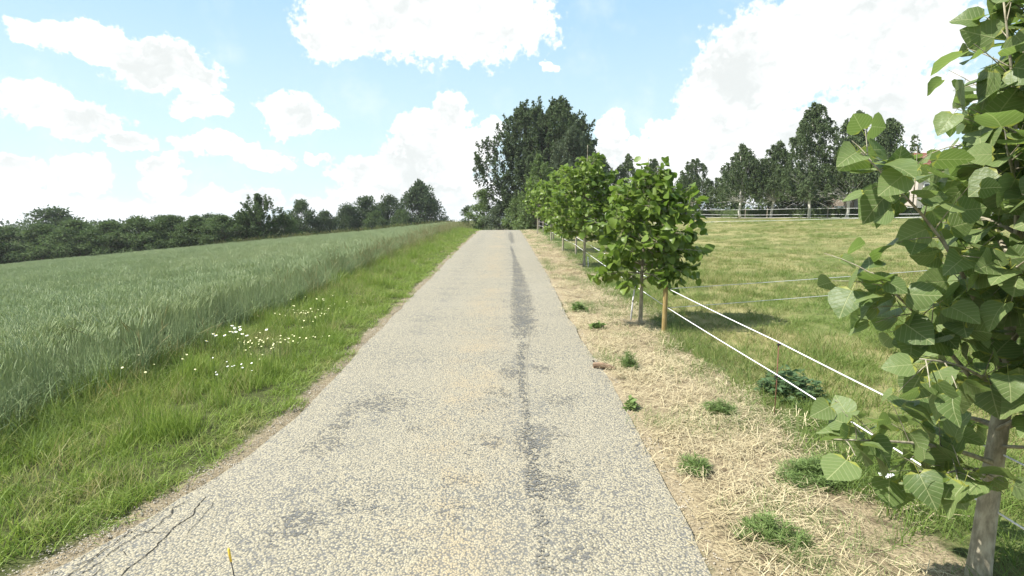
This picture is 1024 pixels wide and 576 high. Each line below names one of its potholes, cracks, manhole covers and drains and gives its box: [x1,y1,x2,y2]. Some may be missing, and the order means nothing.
crack [68,497,214,576]
